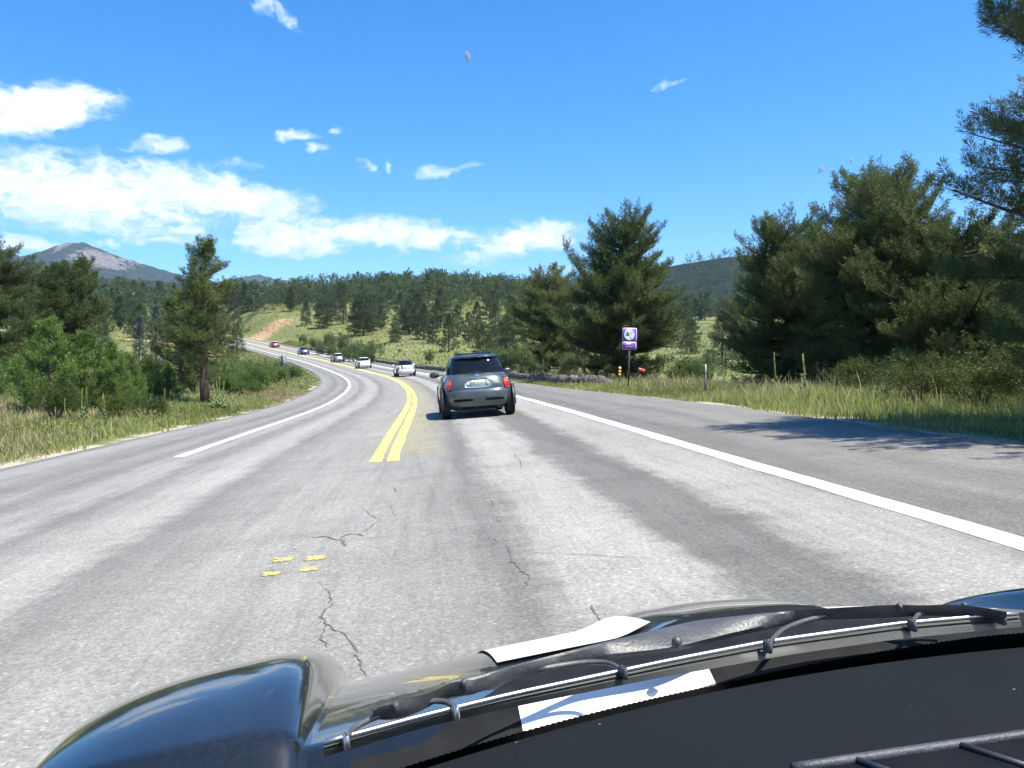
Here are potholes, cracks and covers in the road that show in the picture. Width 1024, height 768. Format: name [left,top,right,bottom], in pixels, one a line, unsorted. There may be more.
crack [493,538,644,589]
crack [292,485,405,546]
crack [319,582,366,676]
